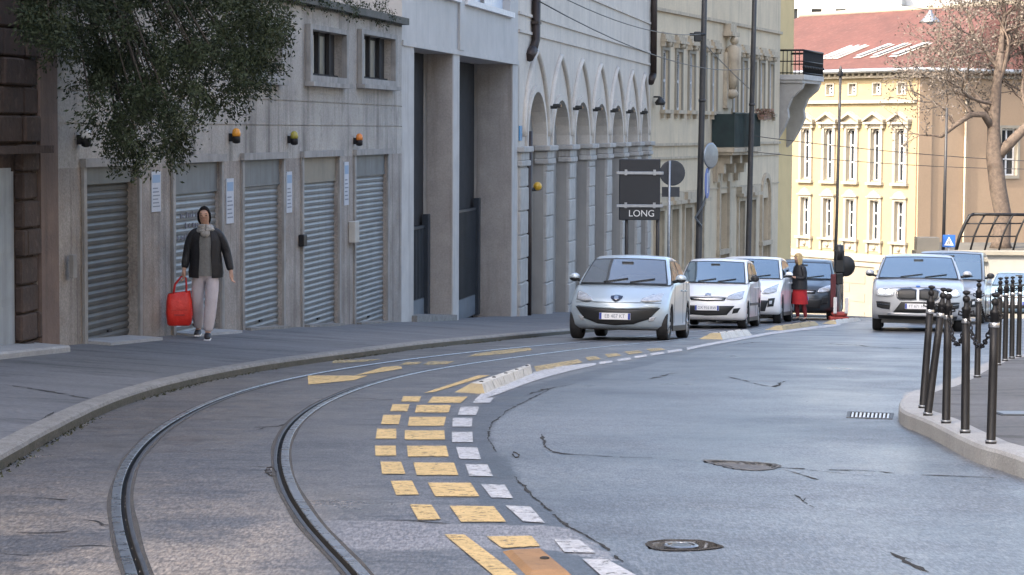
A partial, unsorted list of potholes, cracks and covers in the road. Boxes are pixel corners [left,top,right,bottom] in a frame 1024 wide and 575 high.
crack [540,434,992,507]
drain grate [846,411,894,420]
crack [487,384,623,561]
crack [2,498,115,555]
manhole cover [664,542,699,550]
crack [890,552,929,572]
